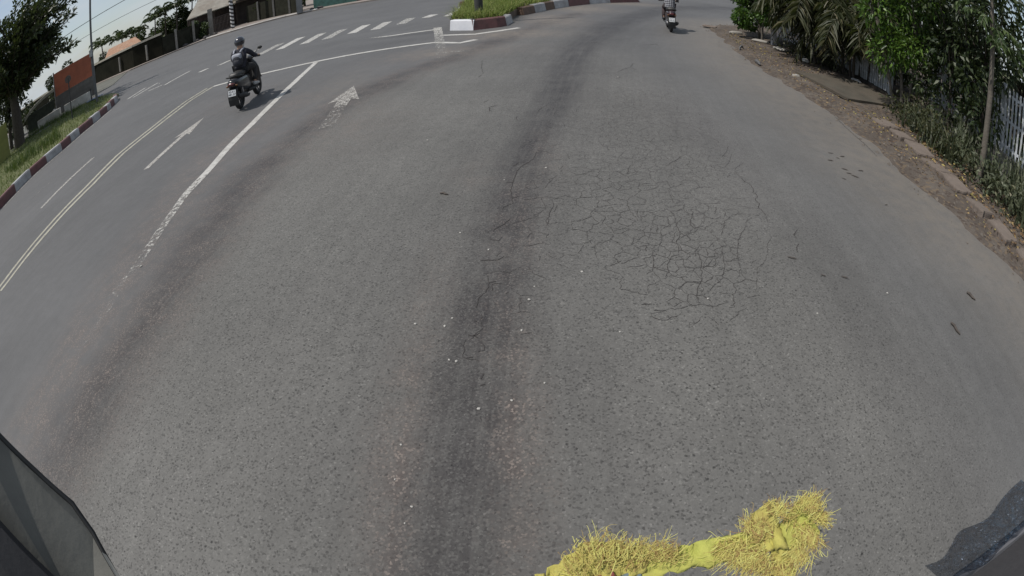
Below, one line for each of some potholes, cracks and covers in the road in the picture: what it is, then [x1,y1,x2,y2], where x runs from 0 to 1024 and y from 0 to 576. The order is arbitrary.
crack [462,104,579,385]
crack [548,85,771,325]
